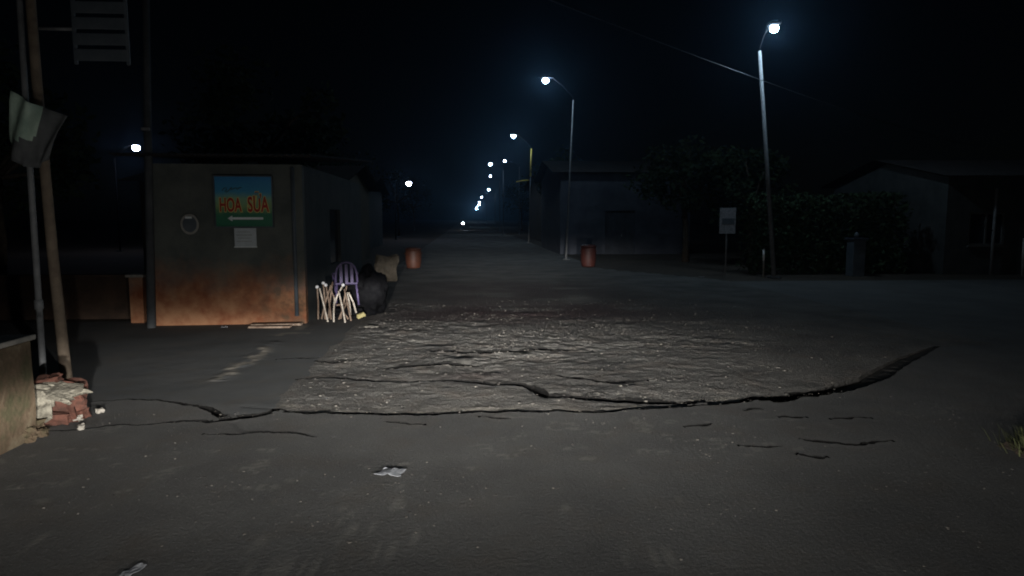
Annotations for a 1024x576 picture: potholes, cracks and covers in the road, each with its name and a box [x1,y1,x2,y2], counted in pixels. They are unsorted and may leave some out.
crack [48,346,940,438]
crack [739,438,892,460]
